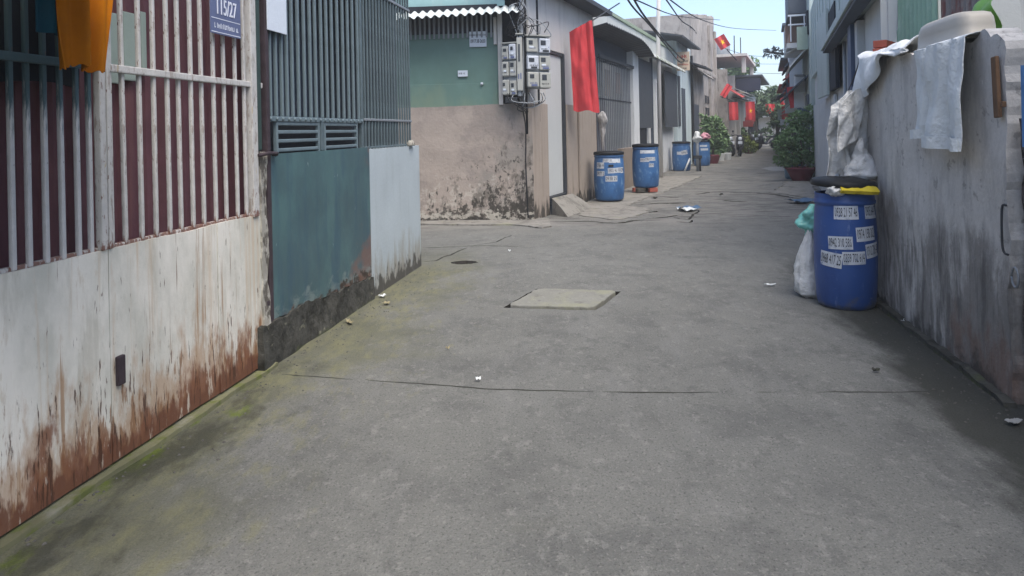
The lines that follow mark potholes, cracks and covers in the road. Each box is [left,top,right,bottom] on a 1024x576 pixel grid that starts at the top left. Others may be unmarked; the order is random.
manhole cover [504,288,620,310]
